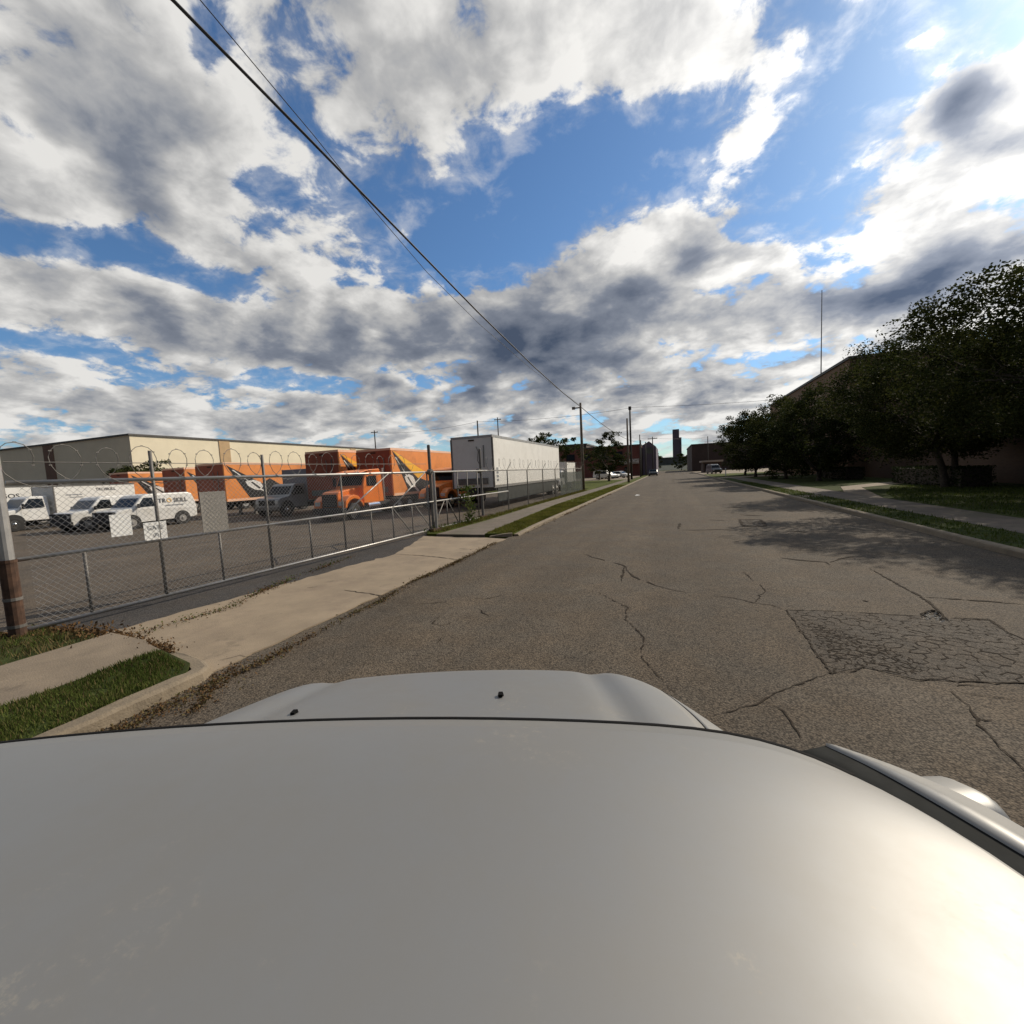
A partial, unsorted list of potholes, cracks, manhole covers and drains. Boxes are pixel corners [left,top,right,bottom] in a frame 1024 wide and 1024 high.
crack [588,555,689,692]
pothole [920,610,949,622]
crack [715,569,1024,769]
